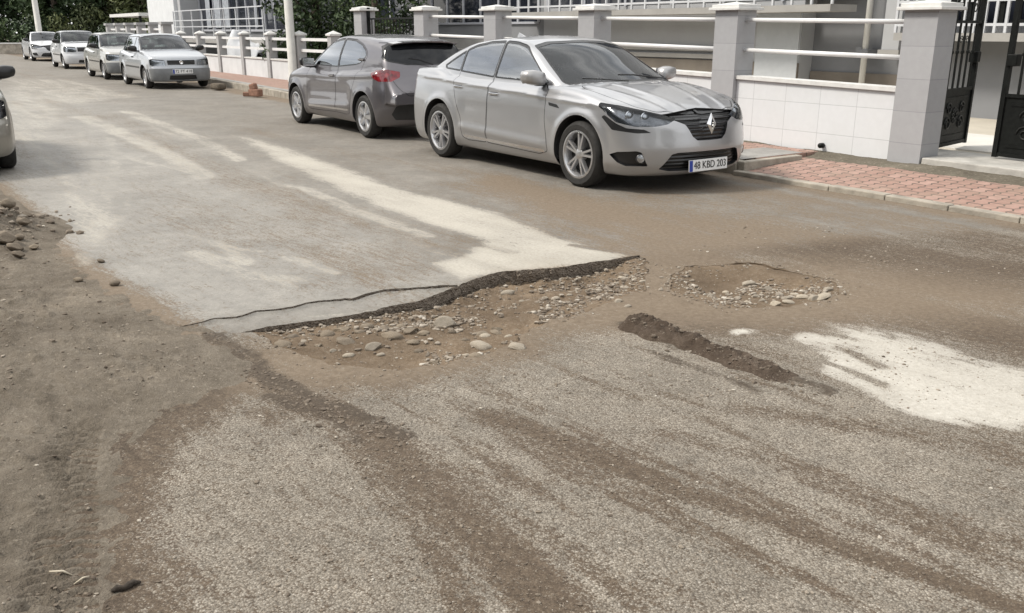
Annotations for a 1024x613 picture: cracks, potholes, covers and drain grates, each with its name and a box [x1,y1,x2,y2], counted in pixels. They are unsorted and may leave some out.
crack [181,285,457,327]
pothole [670,262,840,308]
pothole [246,255,650,371]
